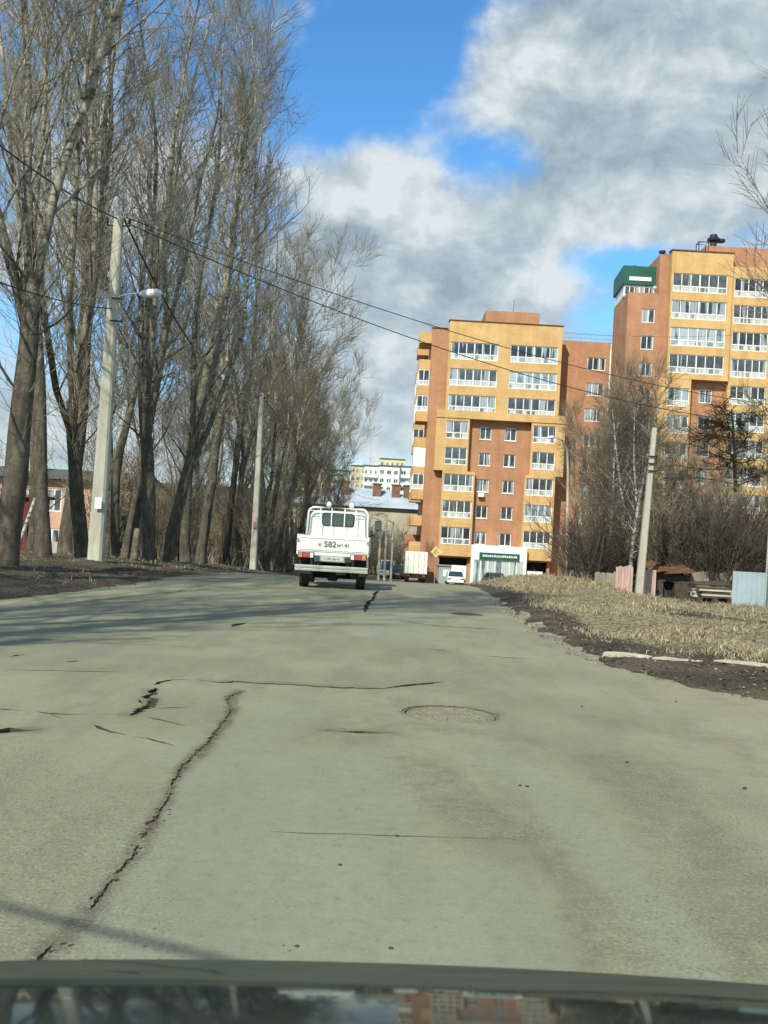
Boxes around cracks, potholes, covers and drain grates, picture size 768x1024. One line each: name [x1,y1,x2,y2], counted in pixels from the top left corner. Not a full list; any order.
crack [270,831,500,839]
crack [363,591,378,612]
crack [1,679,440,960]
manhole cover [402,706,500,723]
